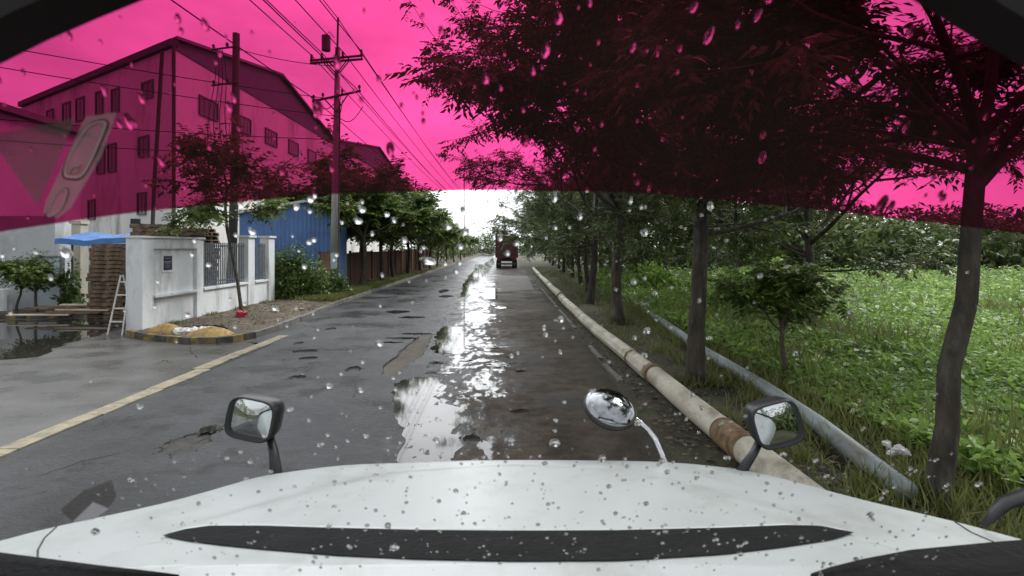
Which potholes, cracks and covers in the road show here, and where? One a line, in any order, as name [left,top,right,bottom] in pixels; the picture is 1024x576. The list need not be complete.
pothole [460,433,483,443]
crack [39,454,114,476]
pothole [152,431,220,458]
